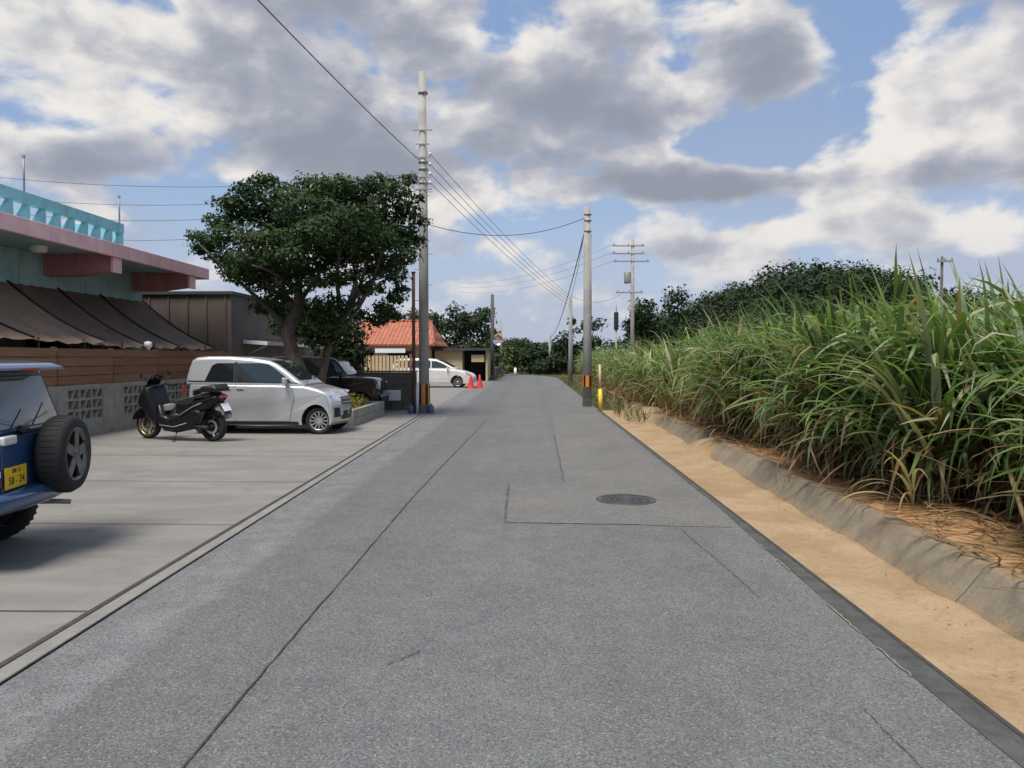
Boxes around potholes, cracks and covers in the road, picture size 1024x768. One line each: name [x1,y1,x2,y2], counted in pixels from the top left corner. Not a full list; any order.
manhole cover [596,494,656,505]
crack [504,484,924,768]
